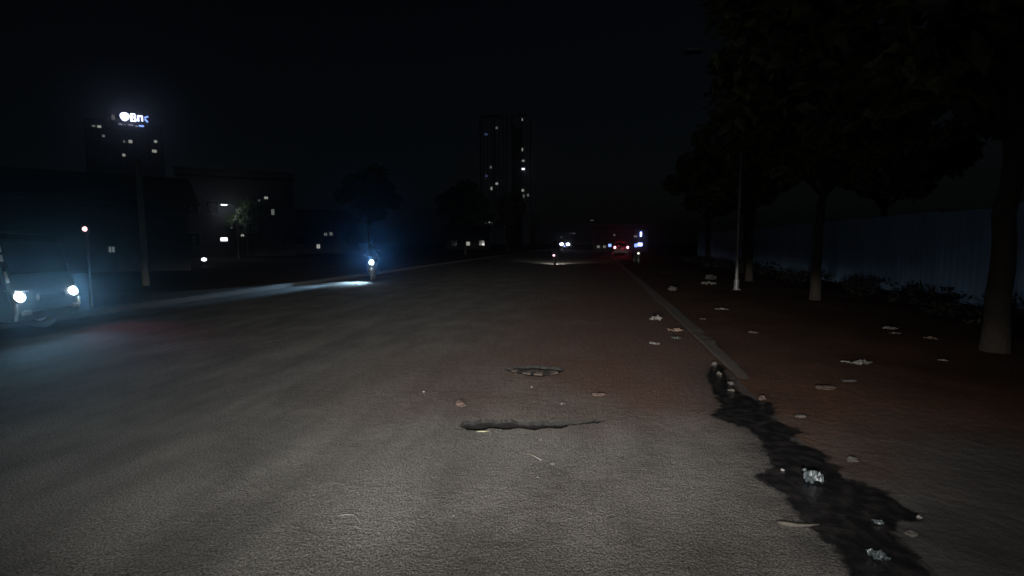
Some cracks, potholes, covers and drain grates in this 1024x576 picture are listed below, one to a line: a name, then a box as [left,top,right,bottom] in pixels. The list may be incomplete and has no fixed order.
pothole [460,419,605,431]
pothole [504,365,564,377]
